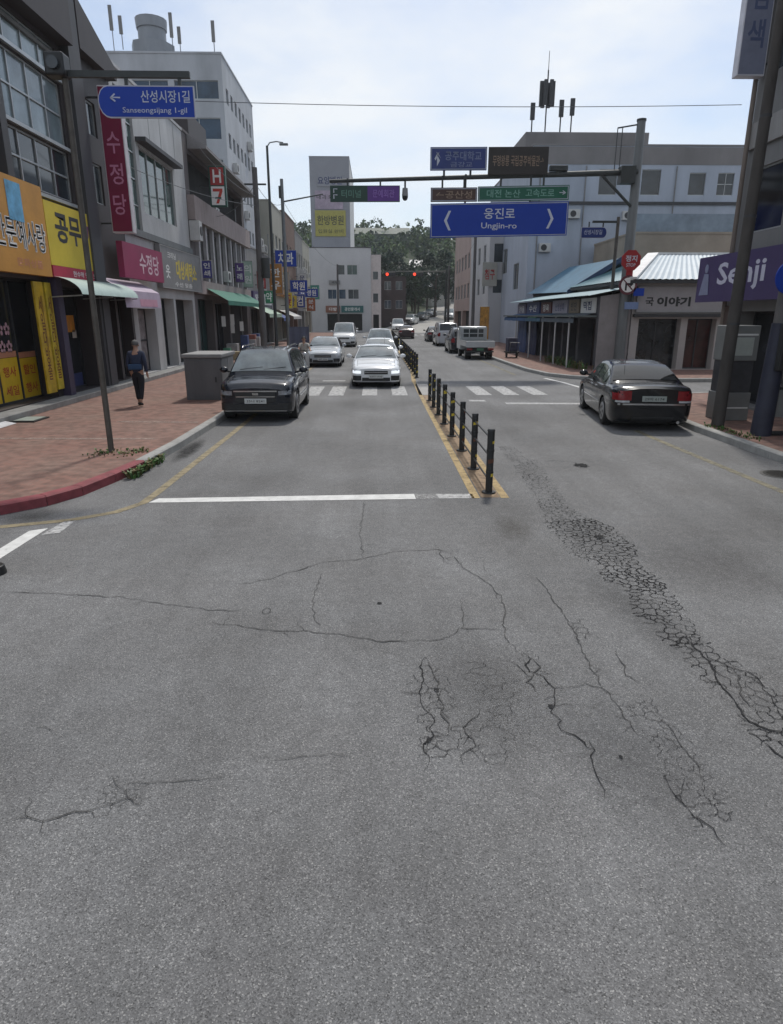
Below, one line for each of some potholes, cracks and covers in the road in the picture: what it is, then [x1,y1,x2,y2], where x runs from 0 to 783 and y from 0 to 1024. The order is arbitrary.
crack [2,446,783,849]
